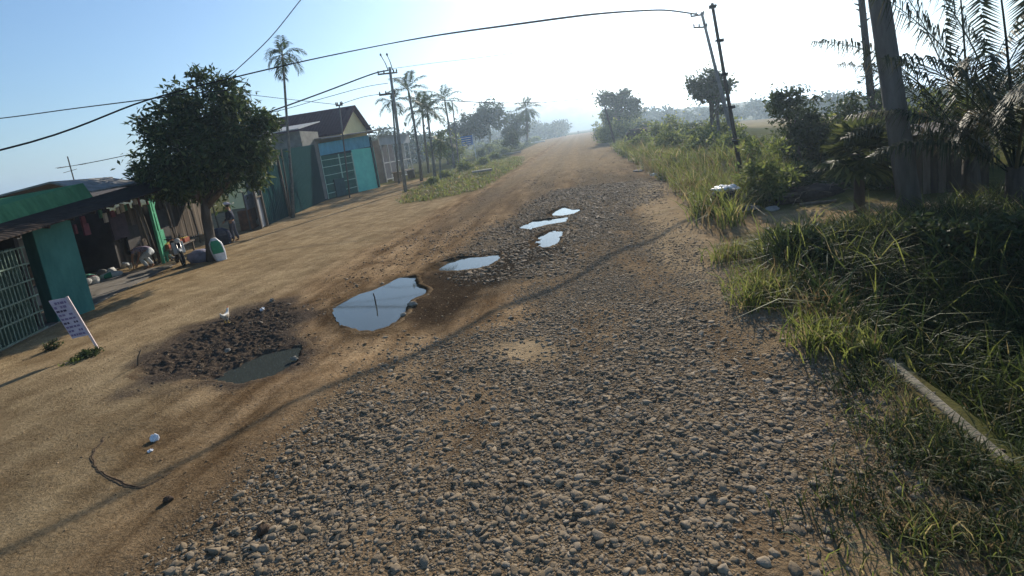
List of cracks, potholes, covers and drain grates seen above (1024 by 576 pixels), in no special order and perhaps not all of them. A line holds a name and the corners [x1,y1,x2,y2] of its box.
pothole [125,300,314,387]
pothole [527,229,565,248]
crack [88,436,171,489]
pothole [546,206,583,216]
pothole [427,252,506,272]
pothole [327,274,433,334]
pothole [517,217,570,230]
